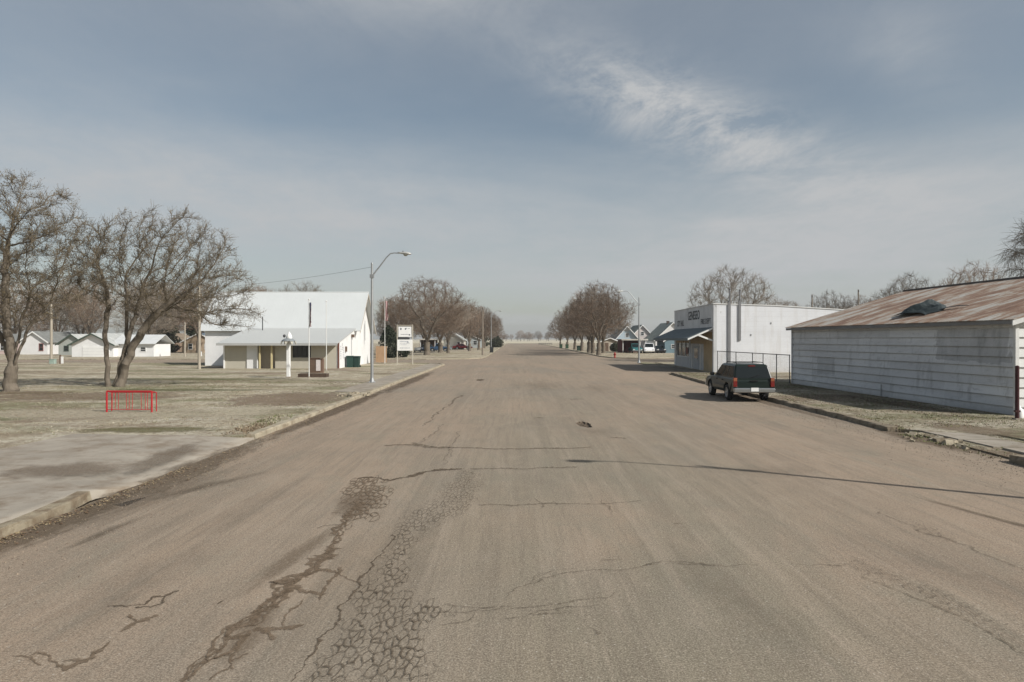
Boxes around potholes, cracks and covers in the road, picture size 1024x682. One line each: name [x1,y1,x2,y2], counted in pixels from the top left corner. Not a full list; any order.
crack [17,395,614,682]
crack [830,560,1022,653]
